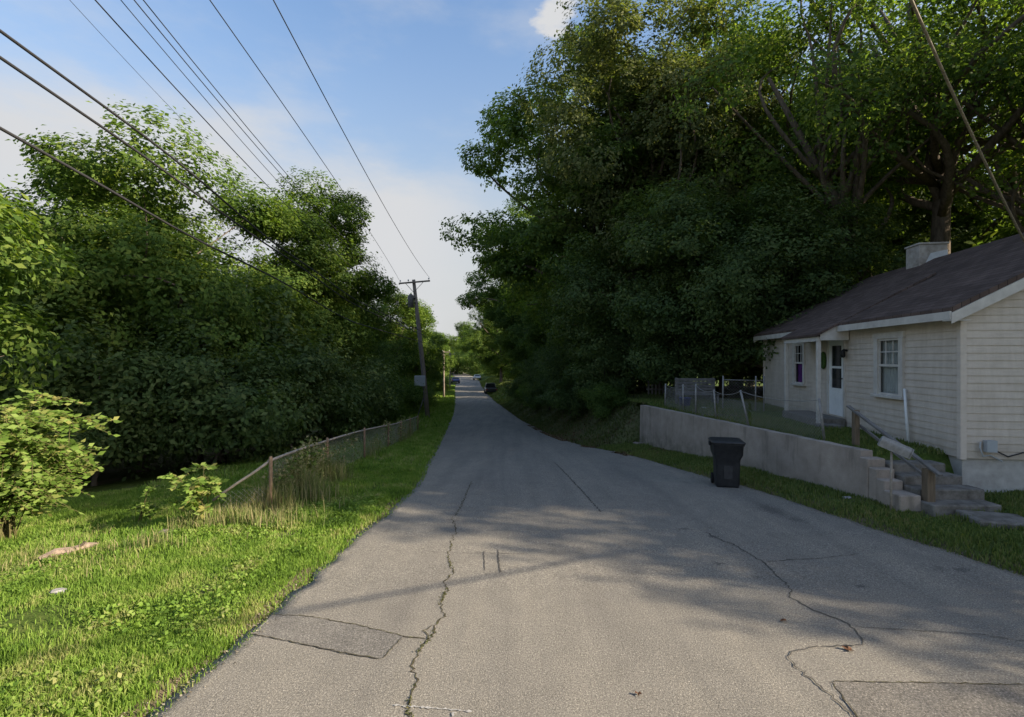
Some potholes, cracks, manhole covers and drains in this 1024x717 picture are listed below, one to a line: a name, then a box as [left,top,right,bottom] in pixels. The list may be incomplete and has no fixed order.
crack [403,481,515,717]
crack [706,531,1024,717]
